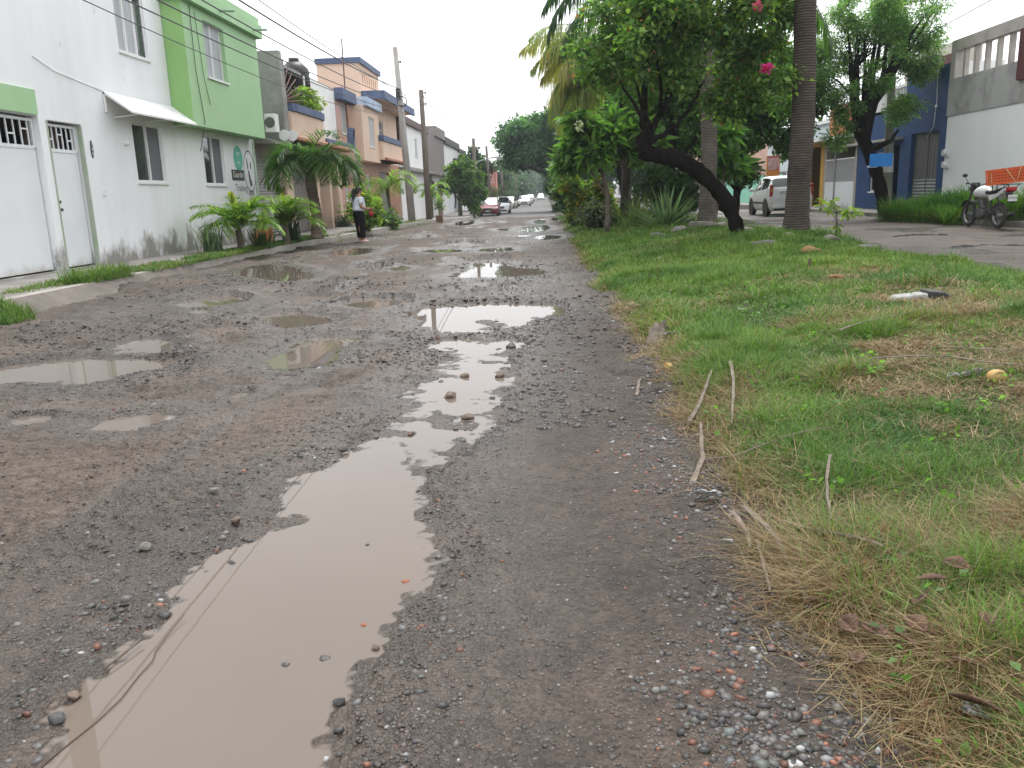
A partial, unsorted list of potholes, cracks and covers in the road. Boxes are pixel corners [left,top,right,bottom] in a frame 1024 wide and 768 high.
pothole [337,292,419,308]
pothole [0,409,68,426]
pothole [376,353,540,419]
pothole [387,297,582,336]
pothole [412,333,543,360]
pothole [359,410,521,469]
pothole [246,329,377,372]
pothole [236,307,346,329]
pothole [437,259,557,278]
pothole [216,261,328,282]
